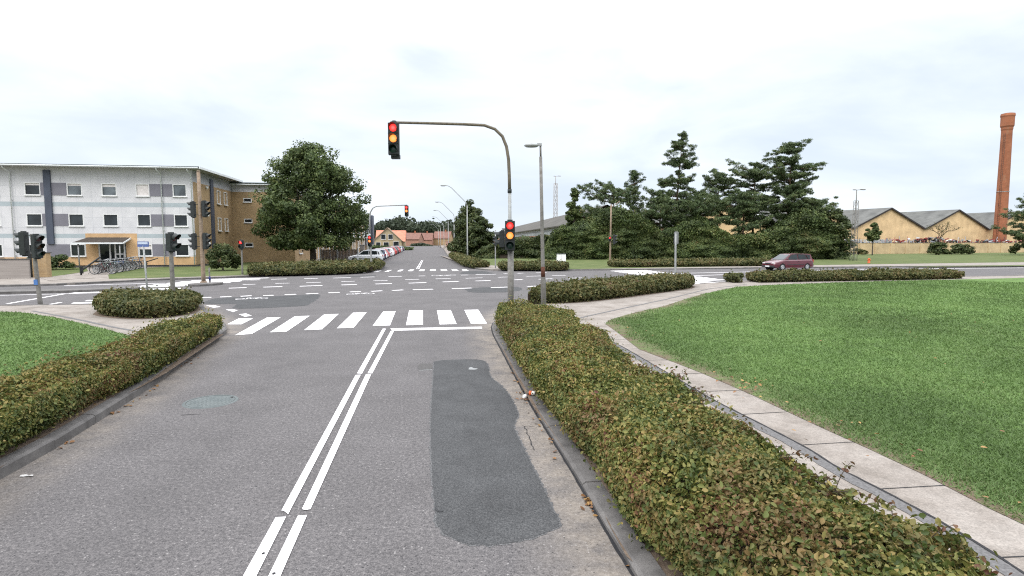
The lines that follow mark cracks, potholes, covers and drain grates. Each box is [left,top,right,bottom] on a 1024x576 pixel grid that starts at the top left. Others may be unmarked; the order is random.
manhole cover [182,395,239,409]
